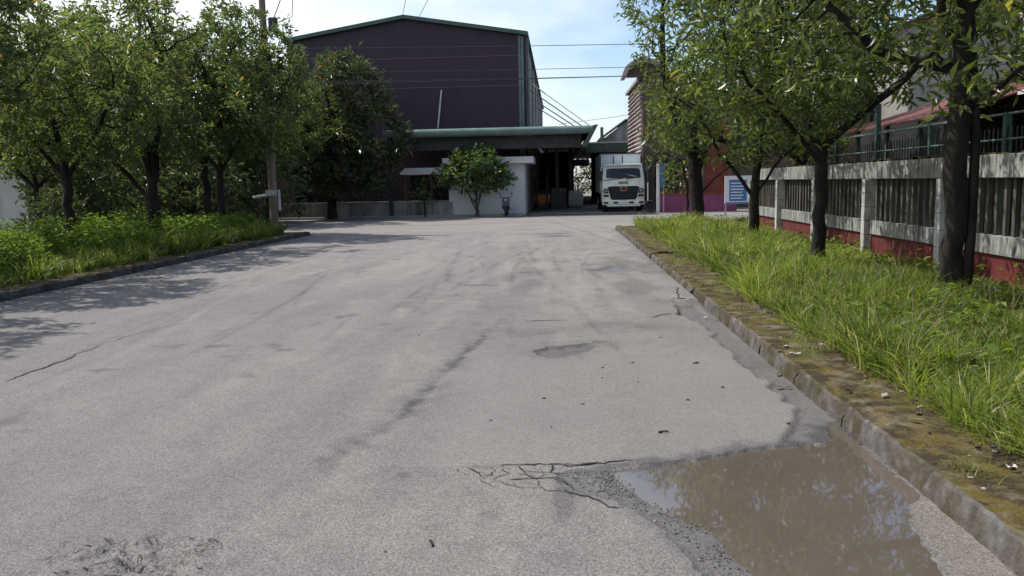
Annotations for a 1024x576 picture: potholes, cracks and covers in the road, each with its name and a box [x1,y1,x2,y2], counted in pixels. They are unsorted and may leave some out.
pothole [555,429,950,576]
crack [457,459,627,508]
crack [6,321,189,381]
